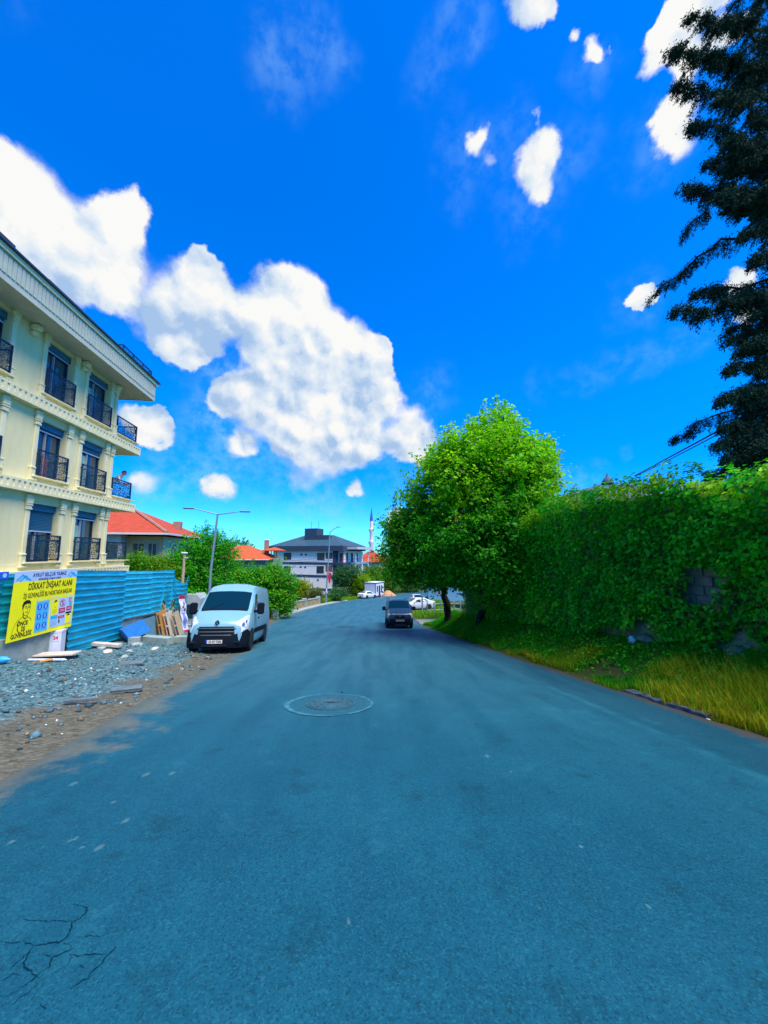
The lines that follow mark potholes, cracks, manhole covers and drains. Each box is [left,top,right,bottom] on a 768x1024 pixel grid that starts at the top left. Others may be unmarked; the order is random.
crack [1,904,115,1009]
manhole cover [283,694,374,716]
